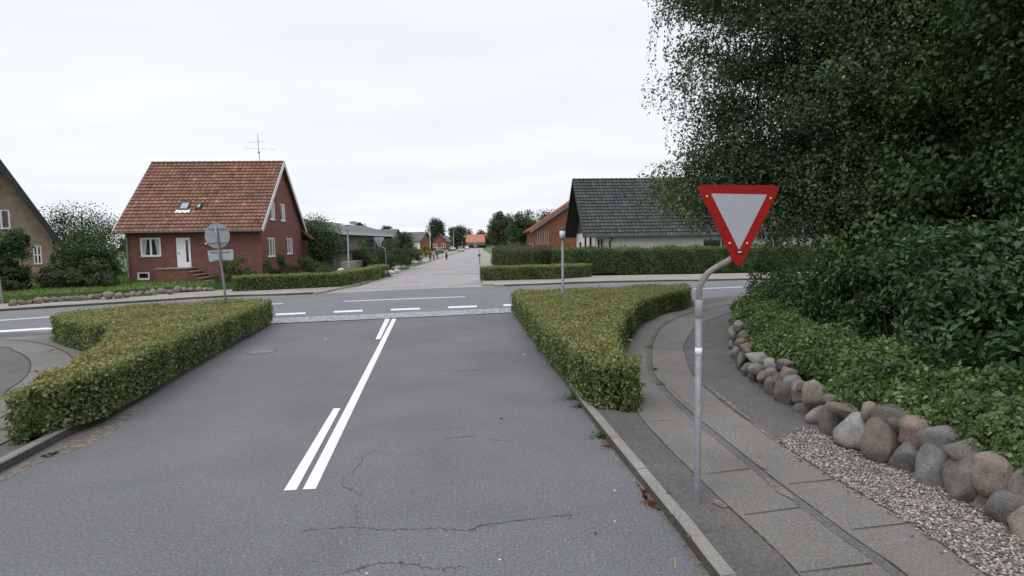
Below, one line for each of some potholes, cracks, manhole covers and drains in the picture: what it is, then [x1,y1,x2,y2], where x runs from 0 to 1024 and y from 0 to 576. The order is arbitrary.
crack [337,558,464,576]
crack [303,451,575,532]
